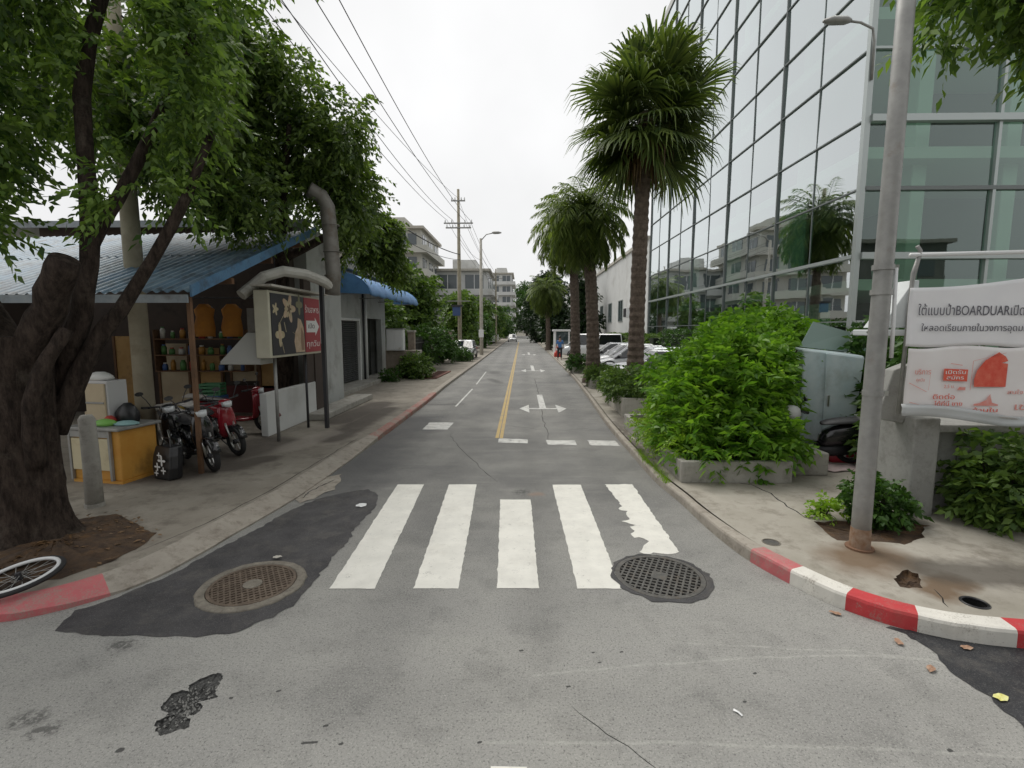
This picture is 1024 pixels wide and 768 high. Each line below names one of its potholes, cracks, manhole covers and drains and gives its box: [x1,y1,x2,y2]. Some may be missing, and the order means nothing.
manhole cover [193,561,308,614]
pothole [894,570,922,588]
crack [577,711,655,768]
utility cover [761,538,781,546]
pothole [154,673,223,736]
